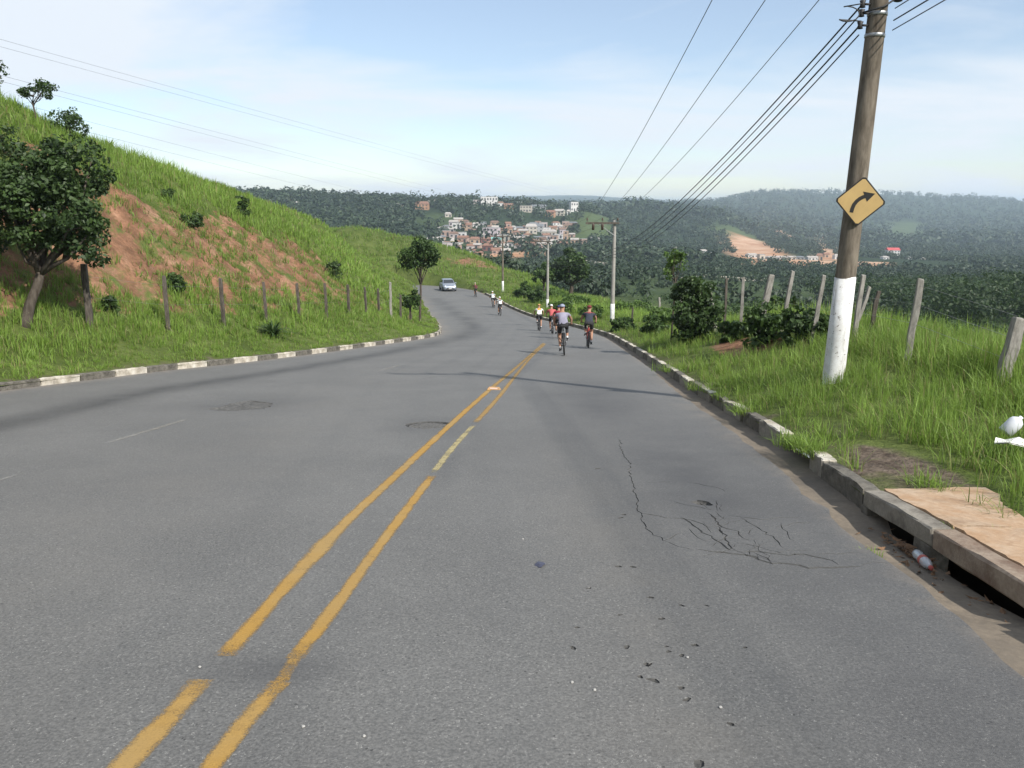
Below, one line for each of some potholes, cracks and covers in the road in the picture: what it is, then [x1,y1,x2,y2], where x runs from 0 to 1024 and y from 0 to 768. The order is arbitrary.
crack [619,440,871,569]
